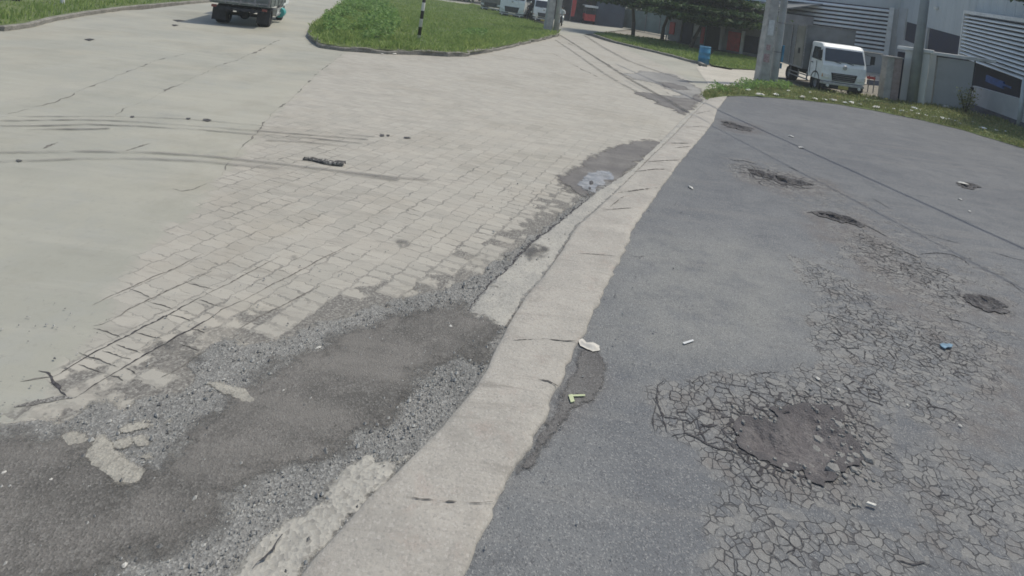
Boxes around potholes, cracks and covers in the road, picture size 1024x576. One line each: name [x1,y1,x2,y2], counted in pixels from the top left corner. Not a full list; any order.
crack [926,460,1005,540]
crack [14,281,218,407]
pothole [963,294,1010,314]
crack [807,211,982,329]
crack [651,367,902,503]
pothole [749,169,814,186]
crack [895,382,957,422]
crack [769,521,824,563]
pothole [733,402,870,486]
pothole [722,121,754,131]
pothole [812,211,865,227]
crack [809,304,988,382]
